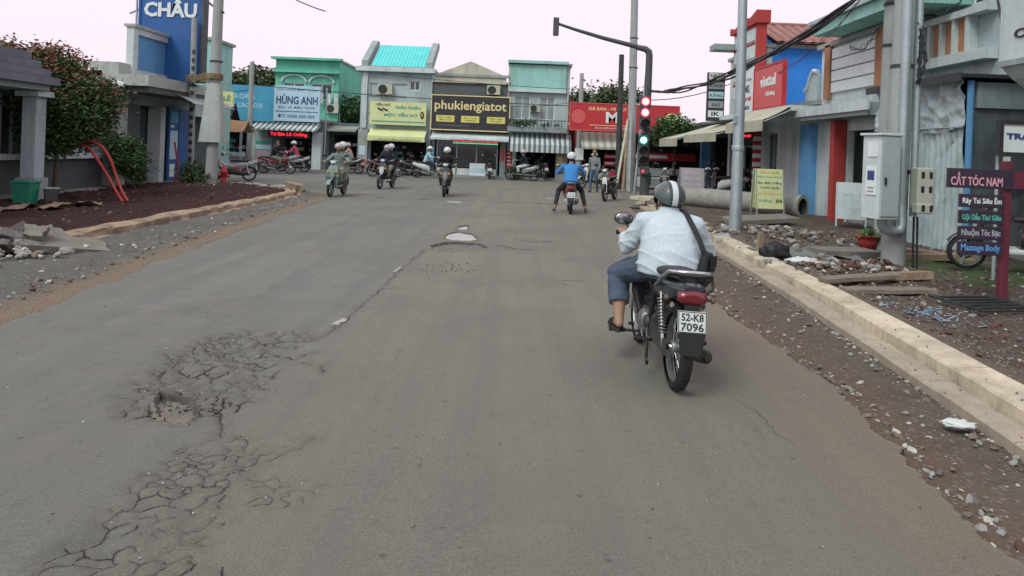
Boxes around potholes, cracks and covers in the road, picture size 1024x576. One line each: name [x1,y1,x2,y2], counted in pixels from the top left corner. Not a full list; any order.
crack [122,322,344,437]
crack [37,437,328,576]
pothole [150,390,201,427]
pothole [426,242,491,251]
